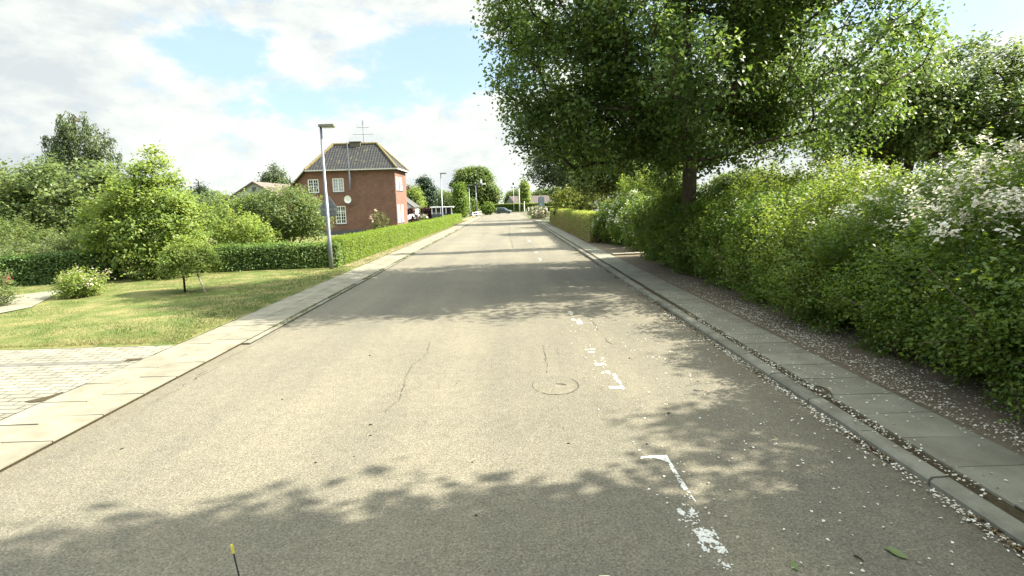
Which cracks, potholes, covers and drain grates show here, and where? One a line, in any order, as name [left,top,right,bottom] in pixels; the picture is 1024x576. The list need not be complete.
manhole cover [532,377,579,395]
